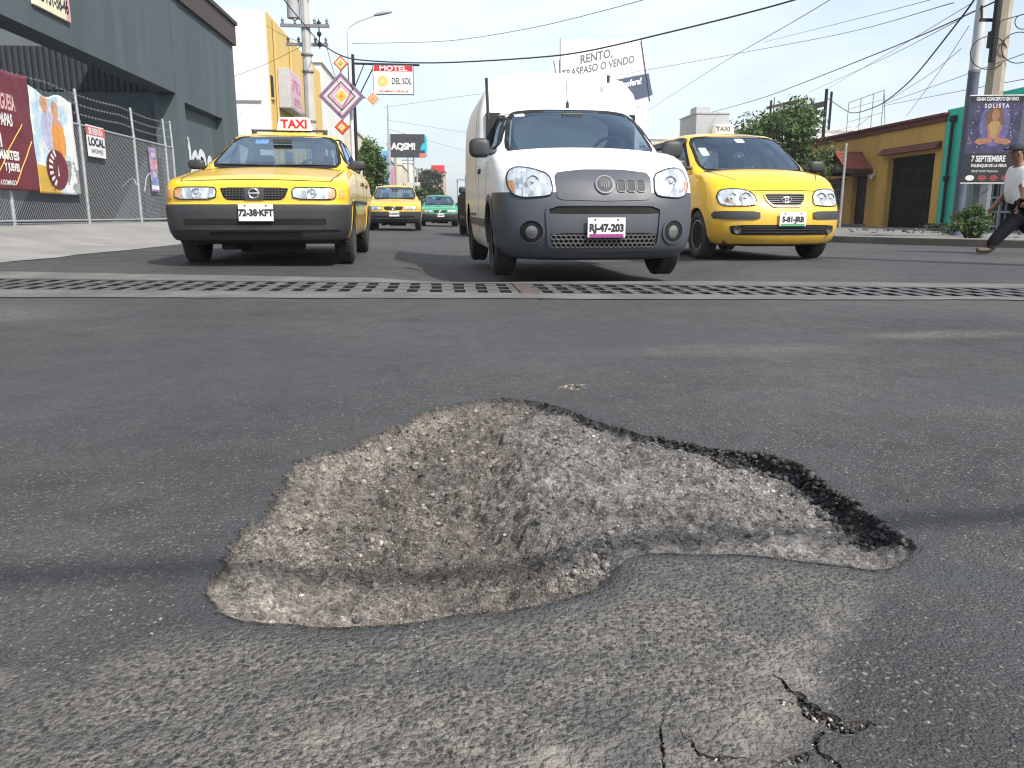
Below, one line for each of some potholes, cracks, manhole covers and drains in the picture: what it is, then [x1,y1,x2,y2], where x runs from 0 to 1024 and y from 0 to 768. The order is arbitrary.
drain grate [529,284,1024,297]
crack [772,674,877,768]
crack [658,721,746,768]
pothole [203,397,917,630]
drain grate [0,279,519,293]
